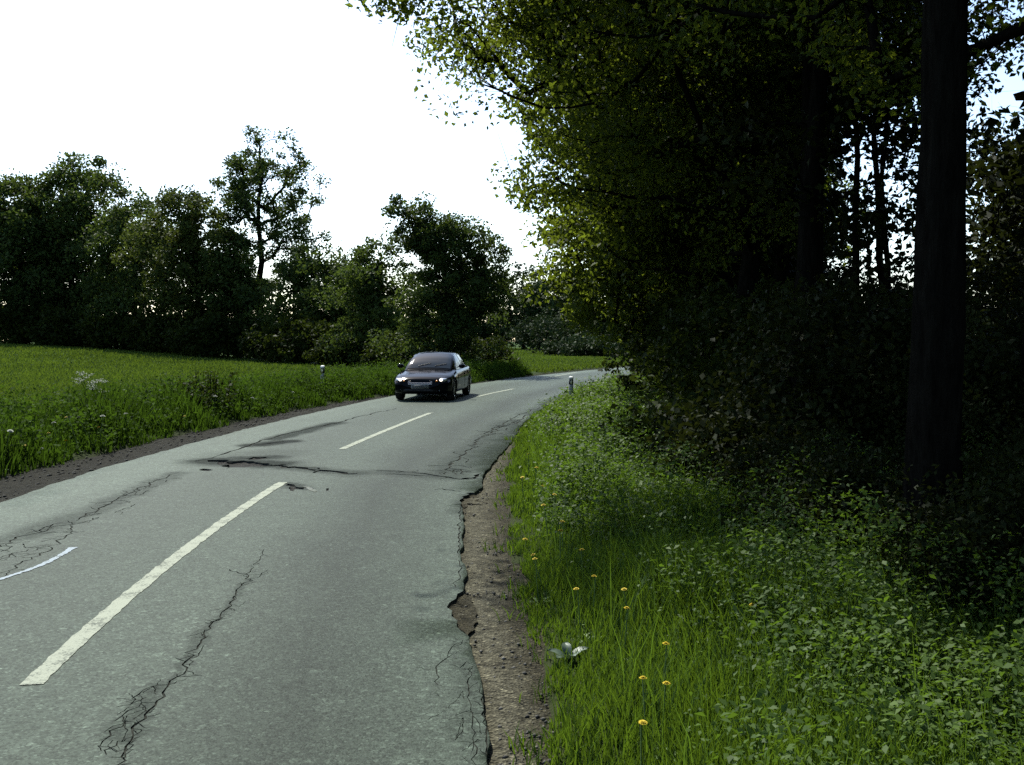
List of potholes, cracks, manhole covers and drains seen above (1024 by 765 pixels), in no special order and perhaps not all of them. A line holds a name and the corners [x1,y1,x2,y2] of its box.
pothole [447,591,478,635]
crack [422,640,488,765]
crack [270,464,357,475]
crack [0,473,176,576]
crack [376,406,543,587]
crack [98,550,271,765]
